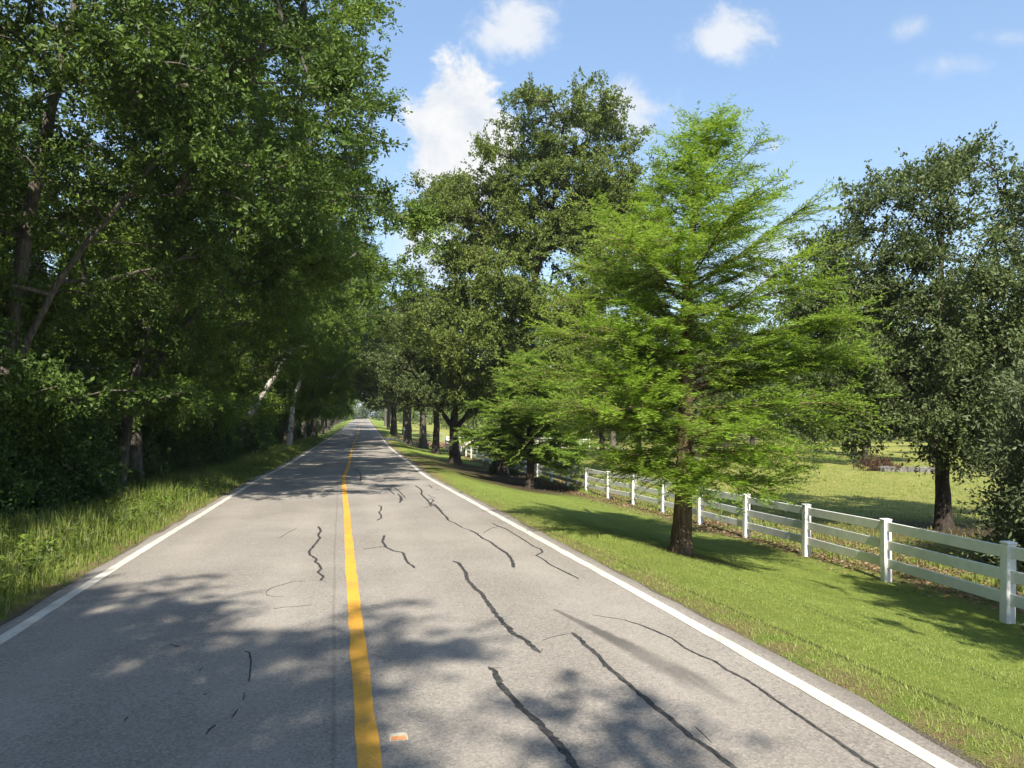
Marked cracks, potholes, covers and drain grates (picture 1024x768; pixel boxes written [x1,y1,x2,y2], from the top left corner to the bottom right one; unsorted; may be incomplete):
crack [354,467,462,527]
crack [206,651,252,735]
